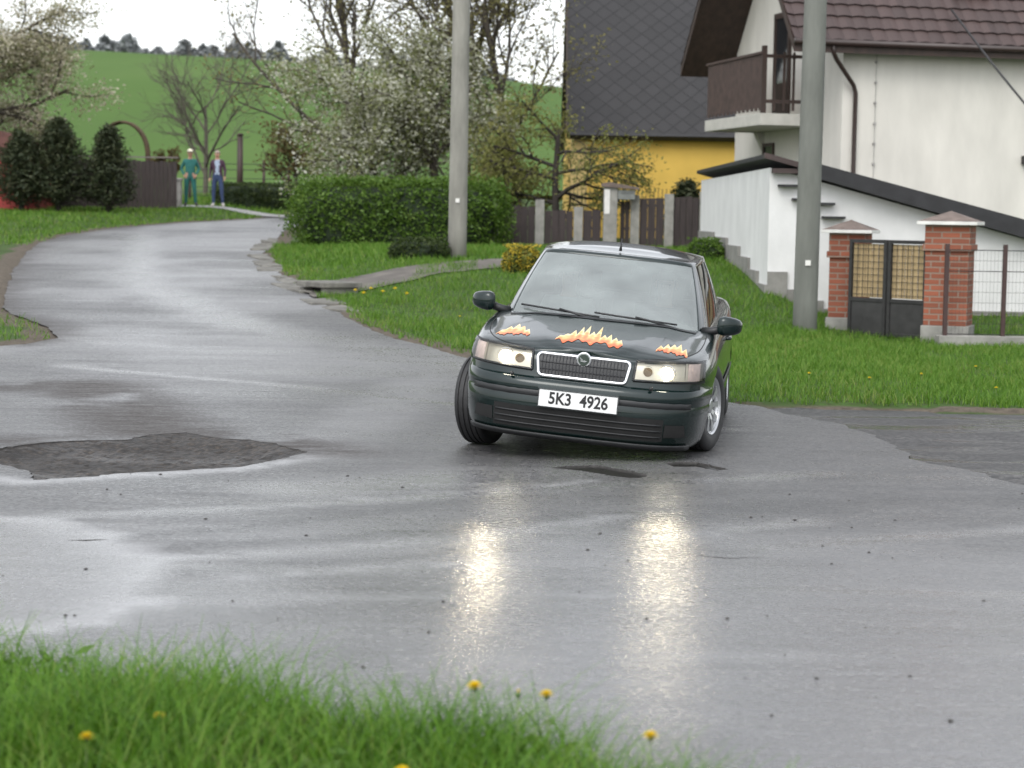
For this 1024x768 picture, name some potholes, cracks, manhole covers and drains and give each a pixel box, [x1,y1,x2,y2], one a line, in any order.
pothole [667,462,726,471]
pothole [553,465,647,478]
